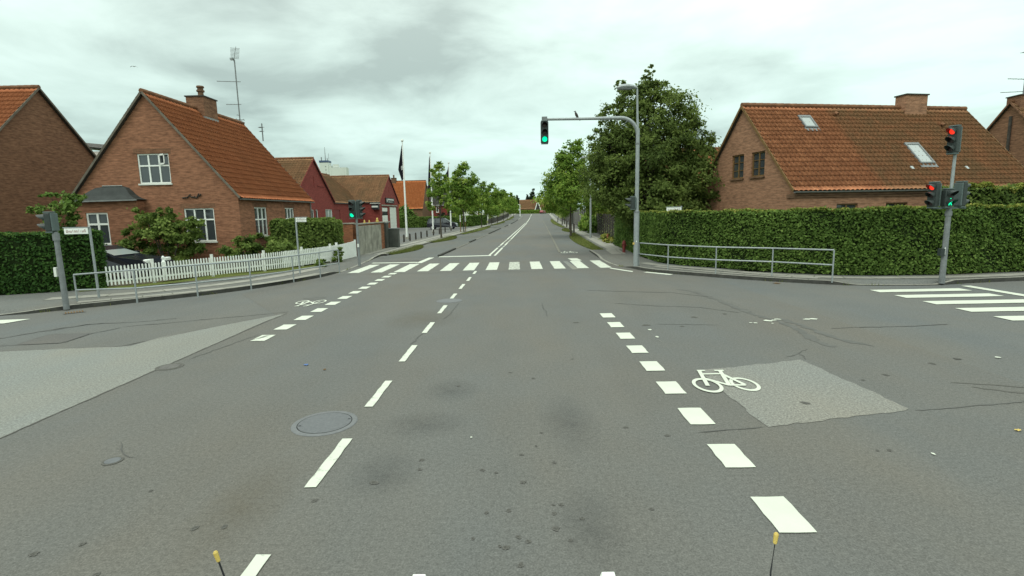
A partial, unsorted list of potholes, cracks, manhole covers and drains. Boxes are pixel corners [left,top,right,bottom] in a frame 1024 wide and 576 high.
manhole cover [291,411,358,437]
crack [677,289,872,360]
